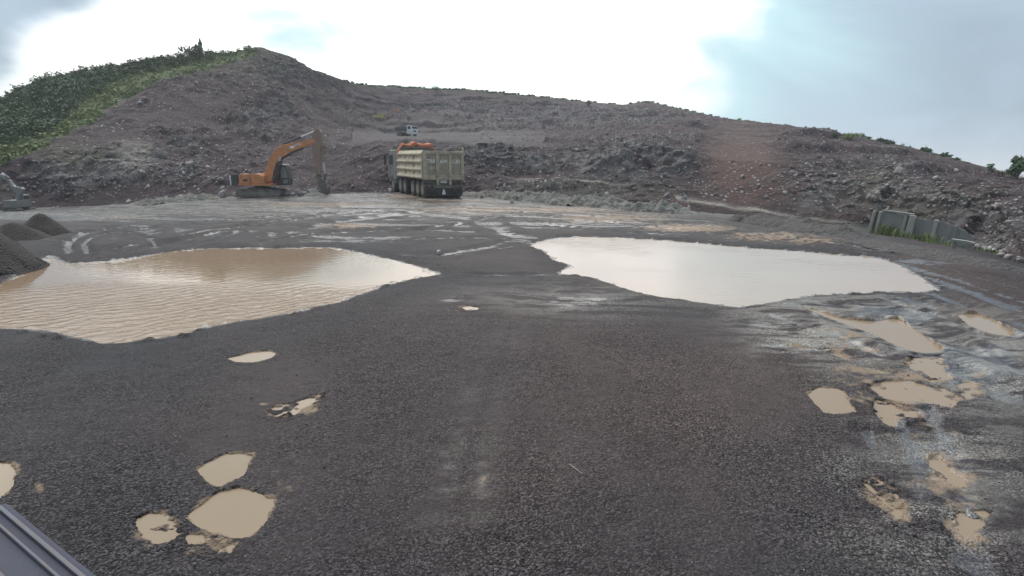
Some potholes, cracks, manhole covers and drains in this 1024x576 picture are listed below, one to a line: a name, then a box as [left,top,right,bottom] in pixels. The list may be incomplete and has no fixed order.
pothole [863,394,930,432]
pothole [181,482,287,546]
pothole [939,502,1006,547]
pothole [795,305,952,357]
pothole [858,376,969,411]
pothole [121,504,191,553]
pothole [255,389,336,423]
pothole [850,471,924,529]
pothole [950,309,1021,338]
pothole [915,449,984,495]
pothole [184,447,264,492]
pothole [219,348,283,365]
